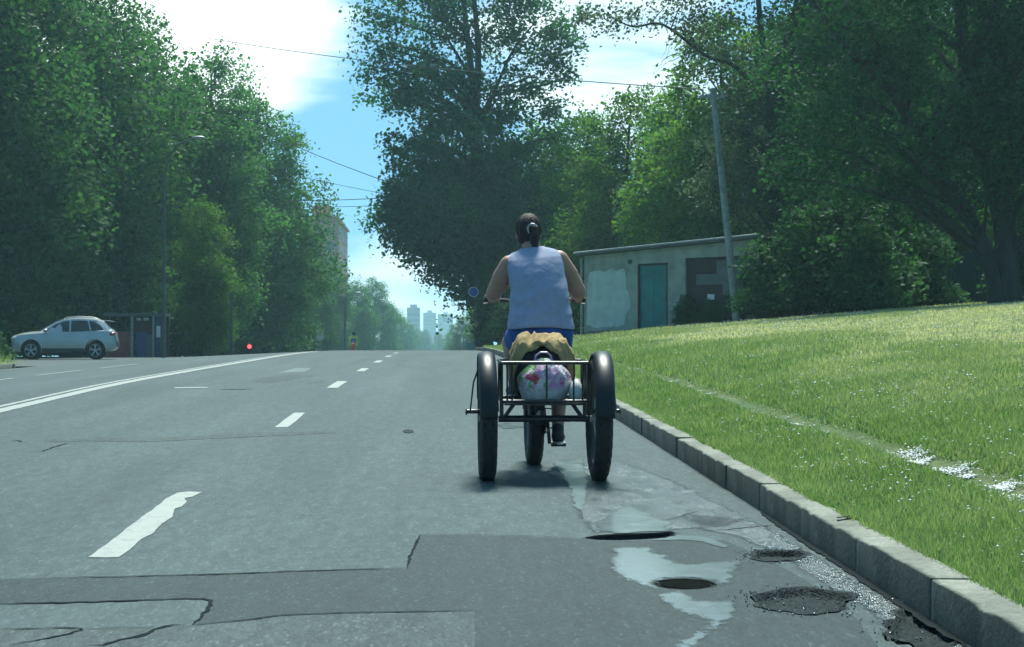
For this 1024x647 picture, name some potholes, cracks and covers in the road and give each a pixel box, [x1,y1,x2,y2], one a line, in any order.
pothole [585,531,675,540]
crack [0,598,473,645]
pothole [860,598,958,647]
pothole [734,546,827,564]
pothole [727,582,882,619]
crack [407,535,420,568]
